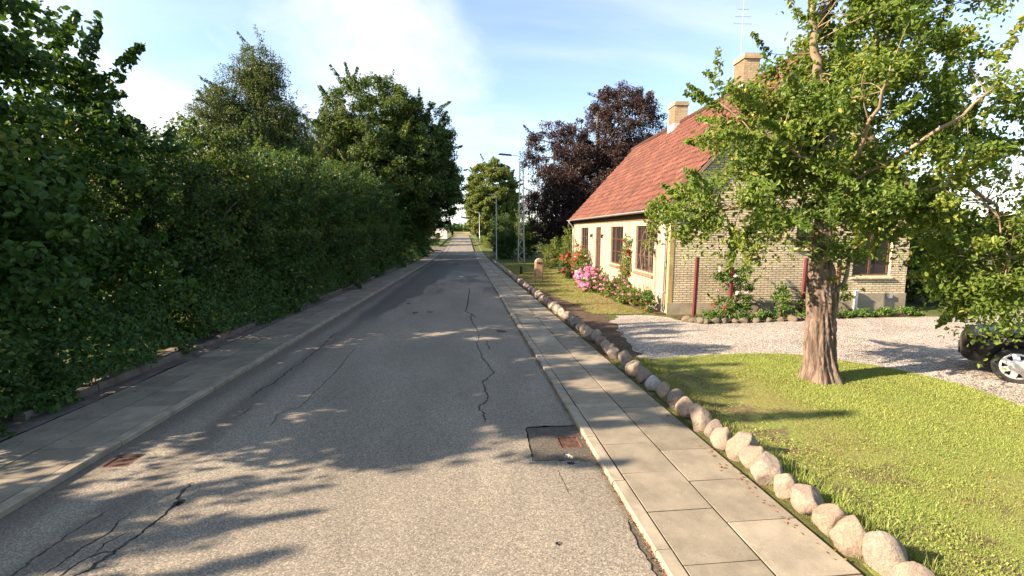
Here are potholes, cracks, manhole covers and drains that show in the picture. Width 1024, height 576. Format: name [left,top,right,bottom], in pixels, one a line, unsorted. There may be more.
crack [465,289,496,423]
crack [239,333,355,426]
crack [11,483,191,576]
